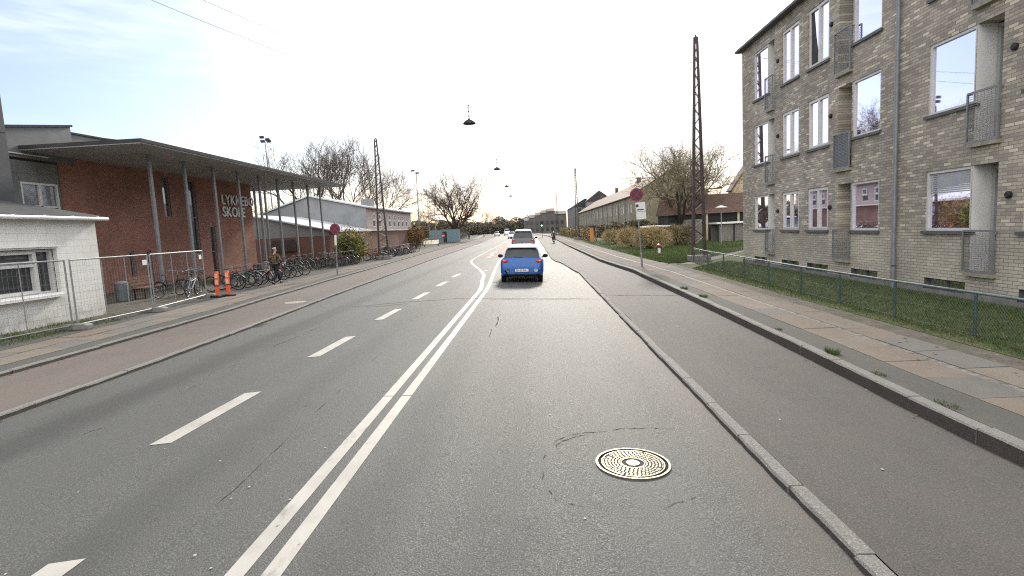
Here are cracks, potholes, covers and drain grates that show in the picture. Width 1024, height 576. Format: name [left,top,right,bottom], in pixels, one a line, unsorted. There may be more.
crack [542,428,671,504]
manhole cover [595,448,671,481]
